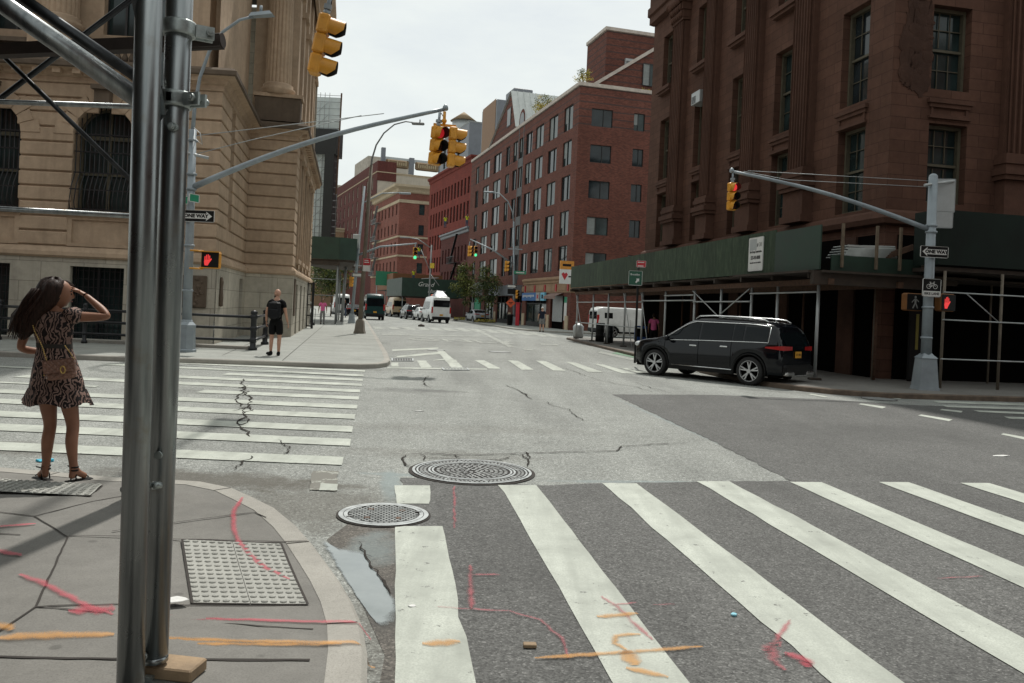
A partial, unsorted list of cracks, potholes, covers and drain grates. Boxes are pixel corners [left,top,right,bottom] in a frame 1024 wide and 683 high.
crack [401,442,687,466]
manhole cover [408,459,535,485]
crack [234,379,253,436]
manhole cover [336,503,431,527]
crack [359,541,391,594]
